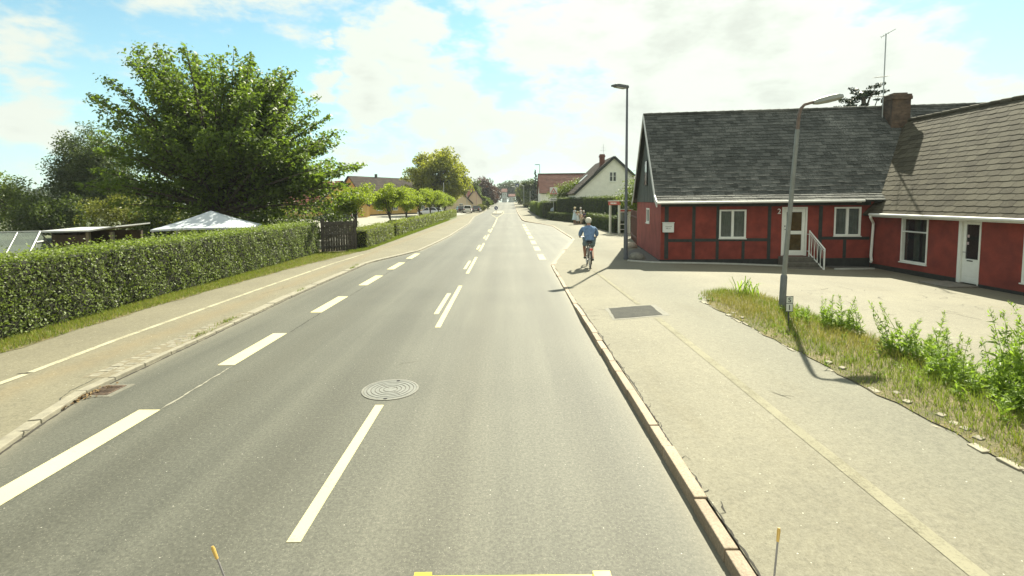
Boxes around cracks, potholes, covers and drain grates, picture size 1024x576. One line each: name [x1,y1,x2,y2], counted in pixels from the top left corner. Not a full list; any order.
drain grate [84,384,135,397]
manhole cover [361,379,419,401]
